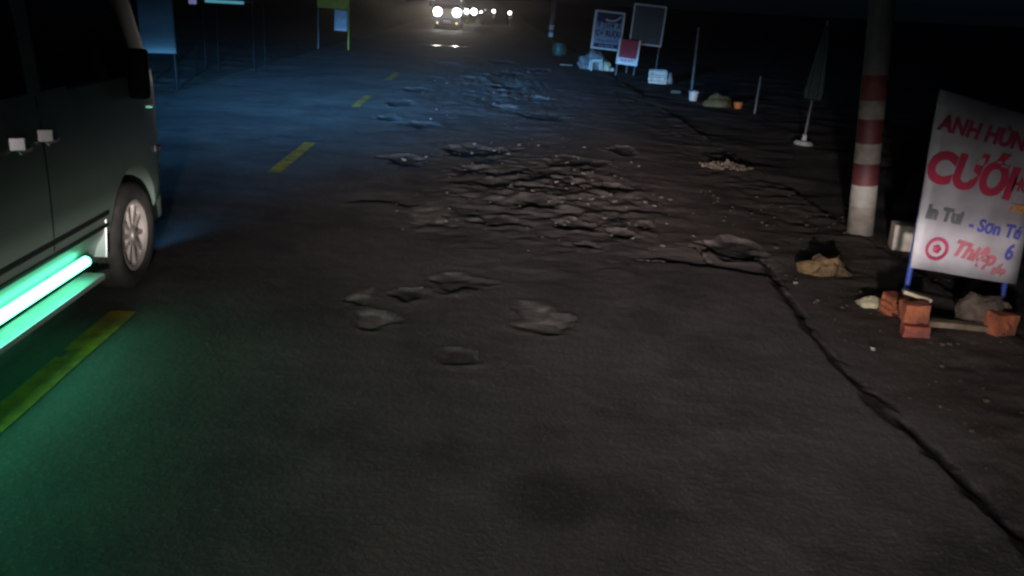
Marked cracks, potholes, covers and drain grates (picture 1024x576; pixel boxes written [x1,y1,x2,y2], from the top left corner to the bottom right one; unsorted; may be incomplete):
pothole [375,153,428,168]
pothole [590,182,635,194]
pothole [601,145,639,157]
pothole [464,215,523,227]
pothole [397,86,435,94]
pothole [428,142,526,160]
pothole [401,198,461,230]
pothole [344,287,378,306]
pothole [550,216,610,232]
pothole [549,176,582,187]
pothole [425,272,499,295]
pothole [508,112,577,122]
